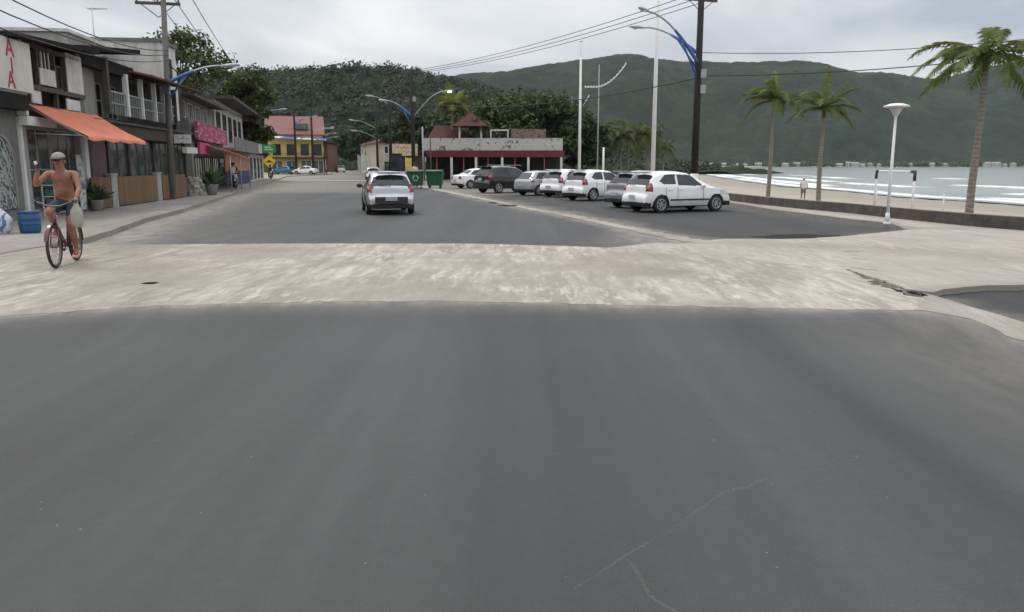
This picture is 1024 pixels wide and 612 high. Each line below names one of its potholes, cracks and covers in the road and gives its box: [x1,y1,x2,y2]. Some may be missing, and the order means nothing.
crack [571,452,874,612]
crack [846,251,907,291]
